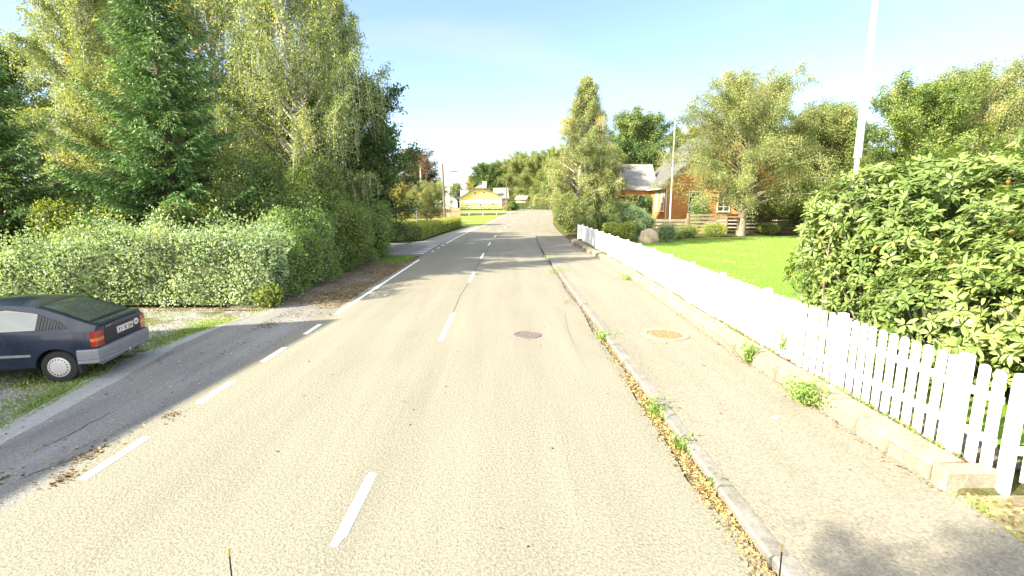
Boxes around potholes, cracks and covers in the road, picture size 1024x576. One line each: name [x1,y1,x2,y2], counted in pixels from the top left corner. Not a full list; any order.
crack [35,413,110,451]
manhole cover [641,328,689,341]
manhole cover [514,331,542,339]
